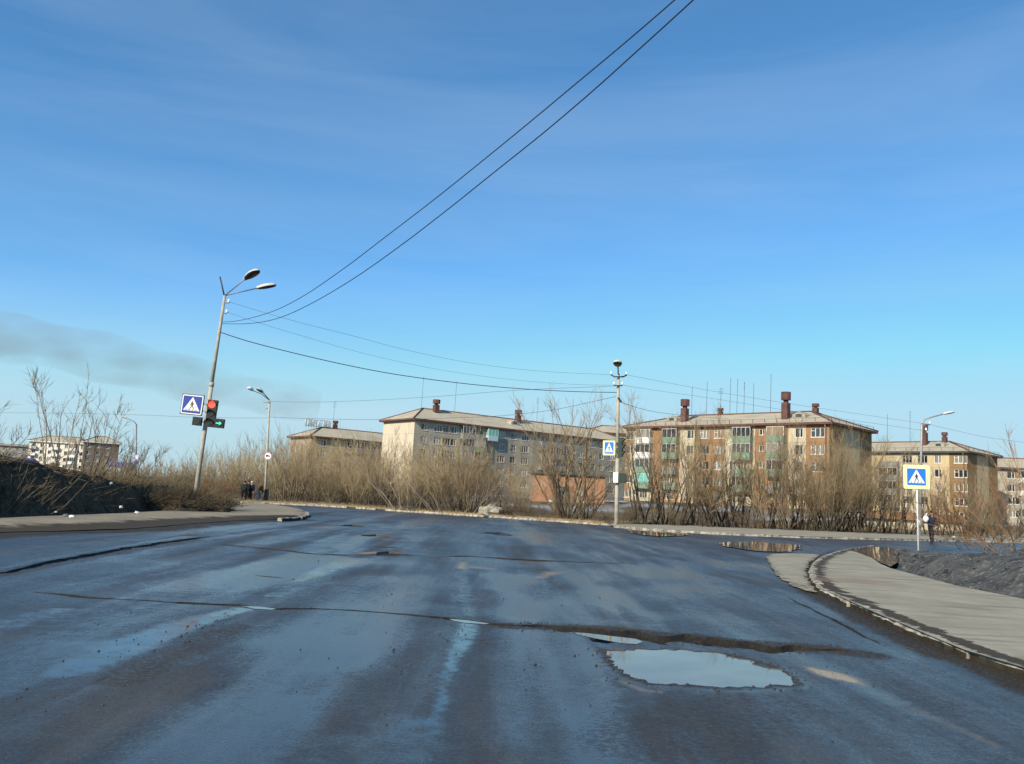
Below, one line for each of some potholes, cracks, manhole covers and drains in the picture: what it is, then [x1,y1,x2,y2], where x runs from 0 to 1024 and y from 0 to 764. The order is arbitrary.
crack [34,592,880,654]
crack [0,536,348,574]
crack [382,547,634,564]
pothole [605,648,797,688]
